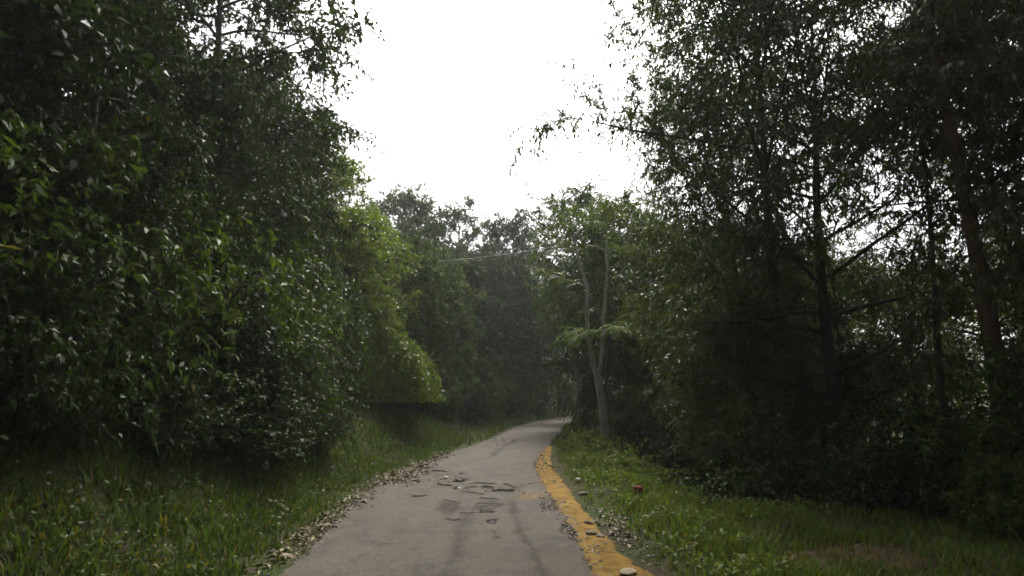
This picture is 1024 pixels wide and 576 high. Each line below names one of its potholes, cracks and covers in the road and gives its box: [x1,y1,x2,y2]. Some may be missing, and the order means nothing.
crack [395,470,543,572]
